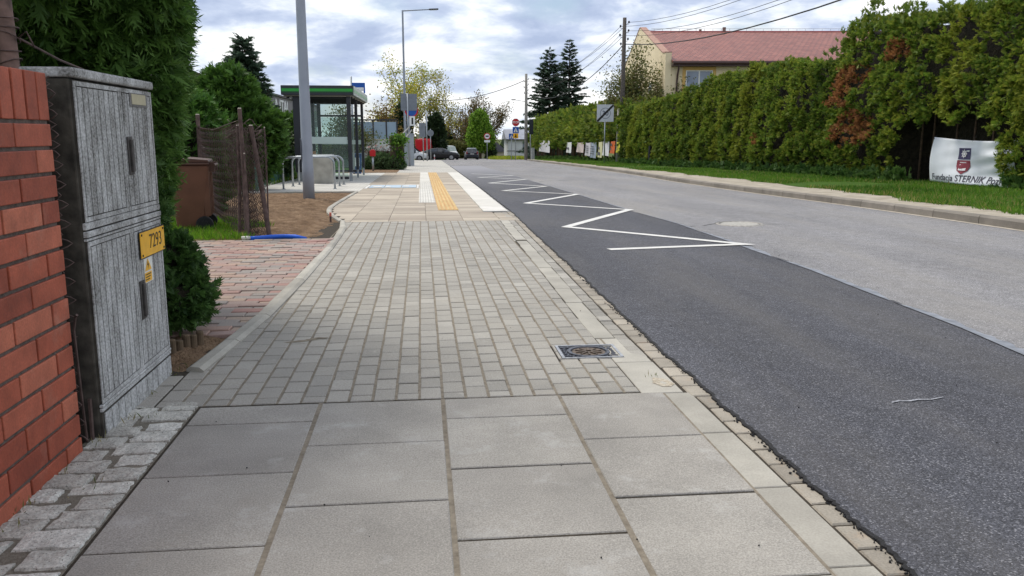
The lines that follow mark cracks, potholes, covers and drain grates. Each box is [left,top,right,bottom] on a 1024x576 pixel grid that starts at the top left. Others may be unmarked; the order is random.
manhole cover [555,344,624,359]
